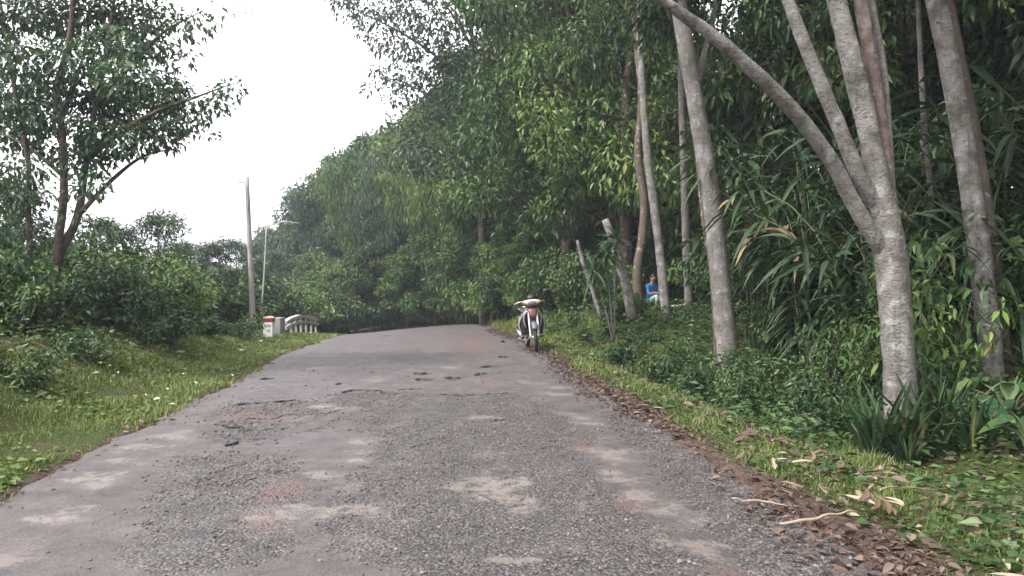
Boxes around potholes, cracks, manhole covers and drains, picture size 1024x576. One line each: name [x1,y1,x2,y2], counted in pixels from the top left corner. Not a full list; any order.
pothole [224,423,294,432]
